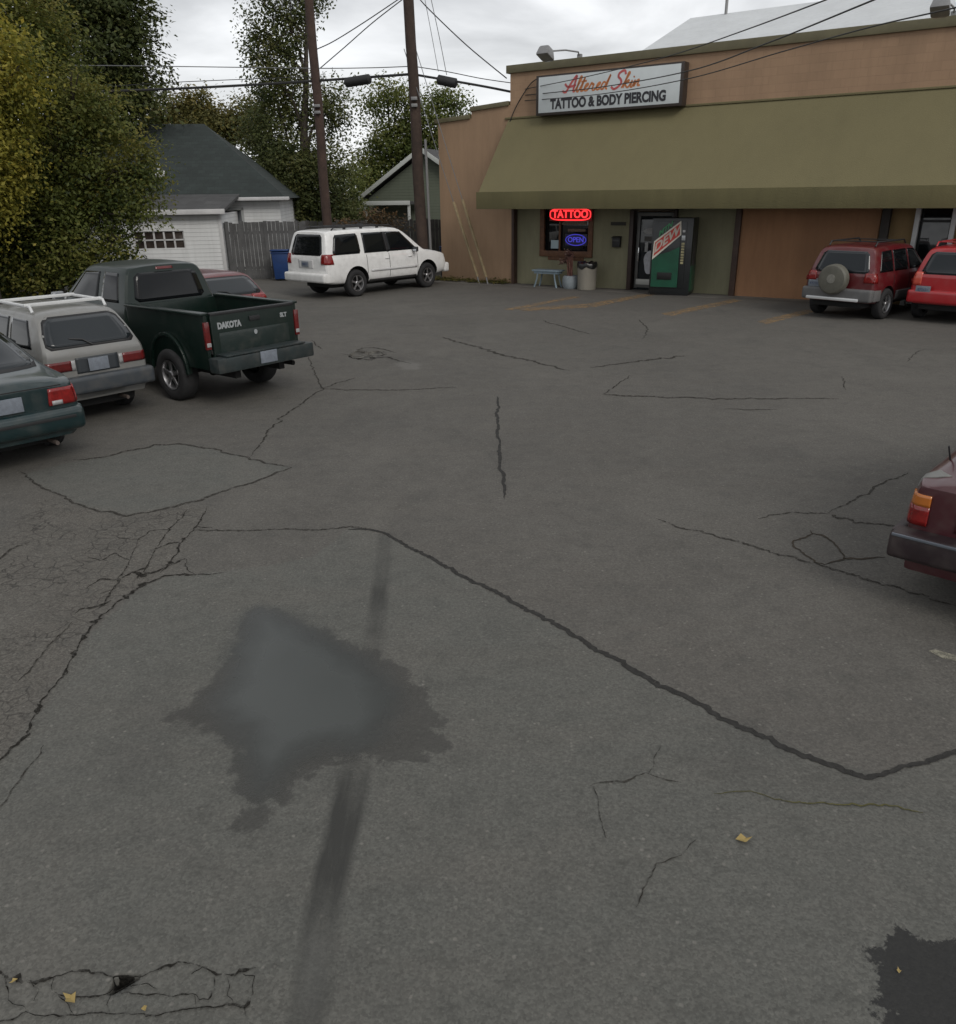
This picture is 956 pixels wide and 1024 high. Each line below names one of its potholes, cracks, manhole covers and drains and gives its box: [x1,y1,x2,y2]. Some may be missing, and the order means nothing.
pothole [112,975,135,994]
crack [596,356,675,367]
crack [604,376,833,410]
crack [656,473,956,606]
crack [0,961,256,1022]
crack [0,340,450,806]
crack [590,747,676,837]
crack [714,791,923,813]
crack [636,841,694,907]
